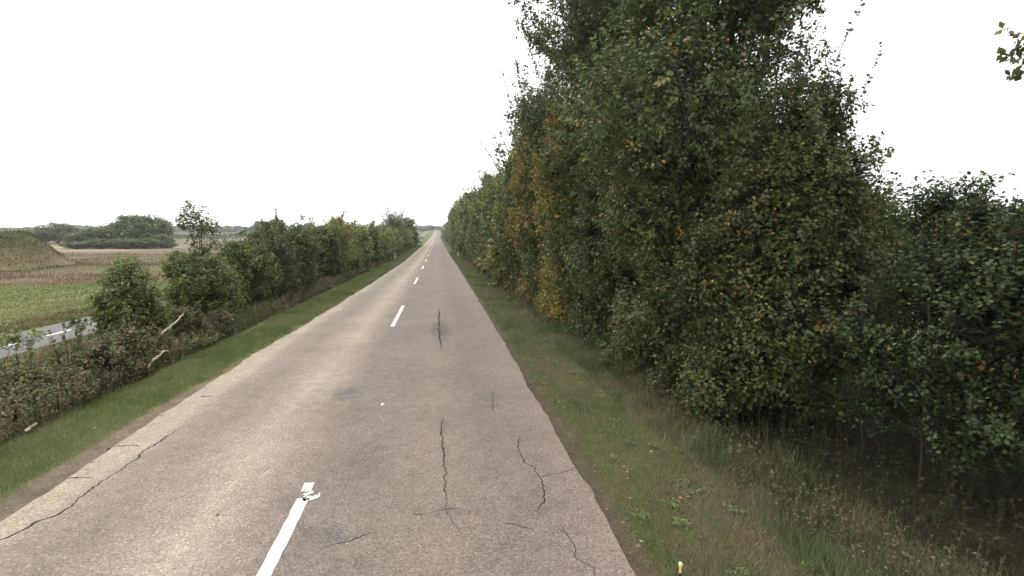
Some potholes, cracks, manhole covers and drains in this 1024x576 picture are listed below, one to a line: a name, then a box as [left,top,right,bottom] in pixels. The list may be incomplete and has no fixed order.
crack [0,428,180,540]
crack [503,436,595,575]
crack [413,420,464,534]
